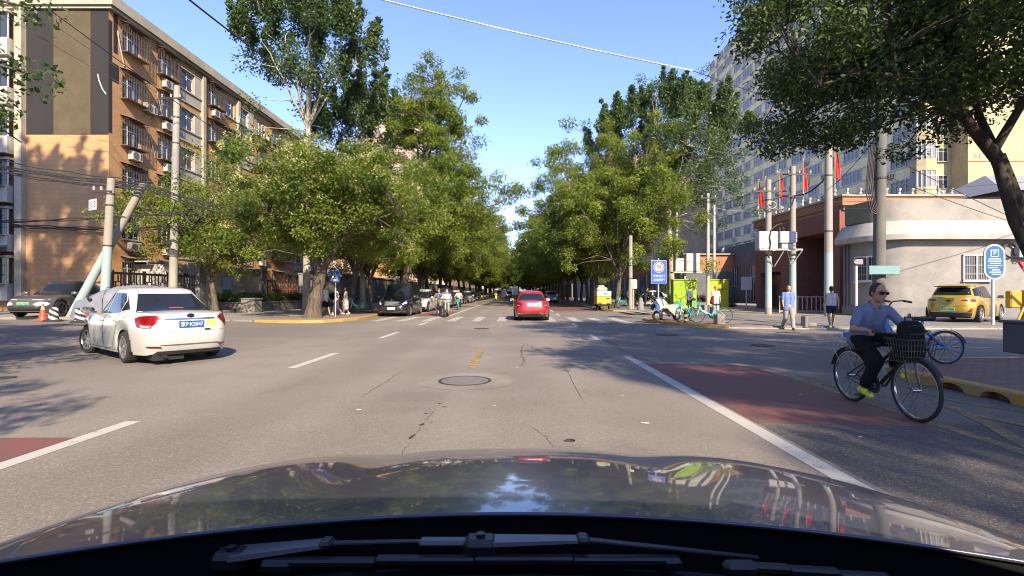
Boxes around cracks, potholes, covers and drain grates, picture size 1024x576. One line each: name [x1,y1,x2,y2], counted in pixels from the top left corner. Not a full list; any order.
manhole cover [418,373,514,390]
